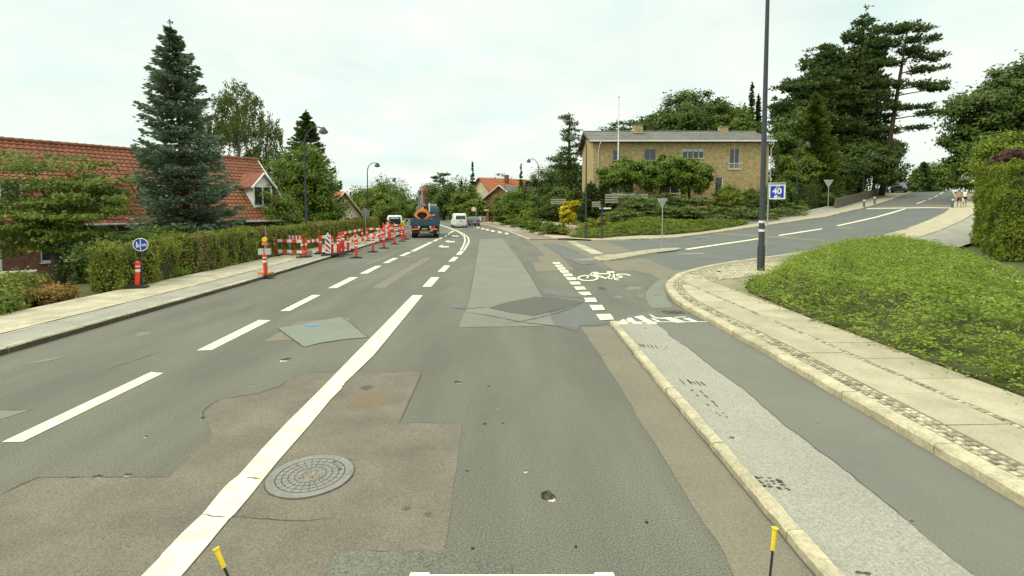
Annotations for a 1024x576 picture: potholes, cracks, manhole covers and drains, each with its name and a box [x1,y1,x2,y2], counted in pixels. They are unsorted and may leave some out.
pothole [541,490,556,502]
manhole cover [265,455,354,499]
